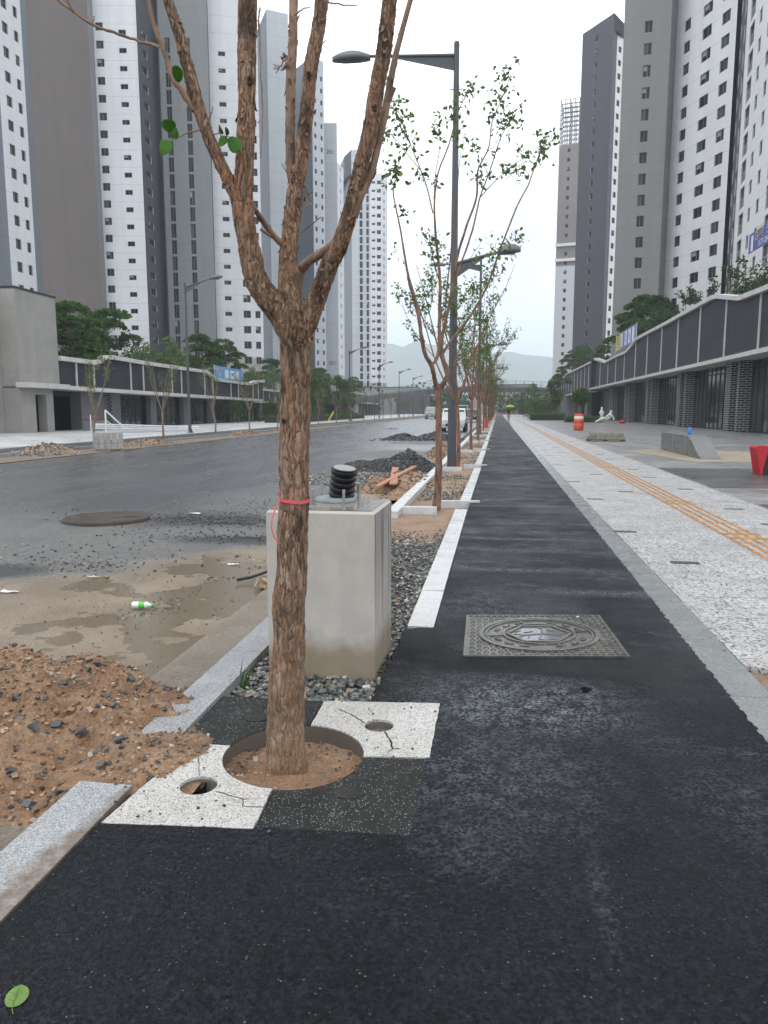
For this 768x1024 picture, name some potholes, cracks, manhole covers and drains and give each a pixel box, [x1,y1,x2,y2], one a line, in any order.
manhole cover [62,511,150,526]
crack [339,709,400,751]
crack [198,756,263,807]
manhole cover [463,615,630,658]
